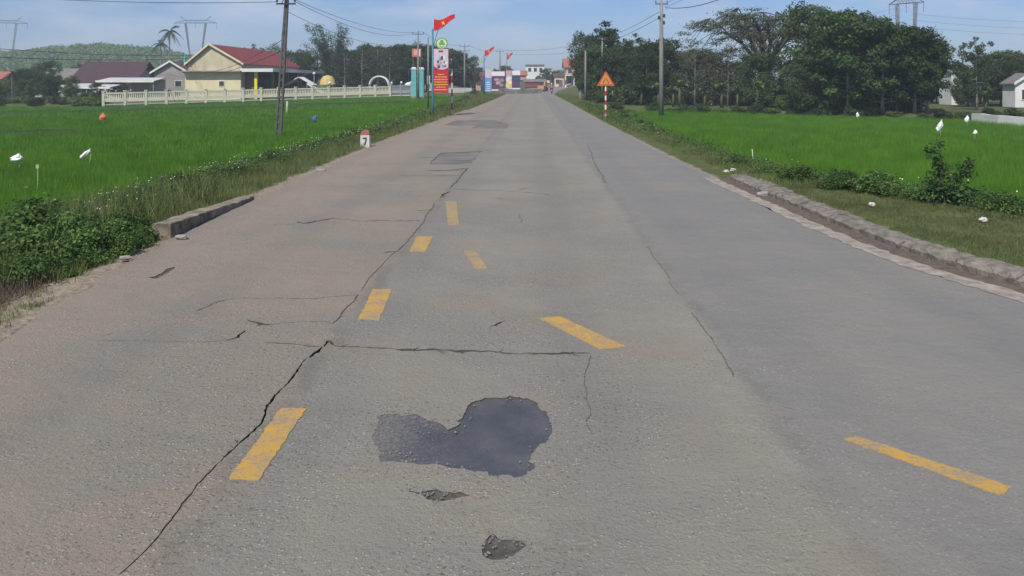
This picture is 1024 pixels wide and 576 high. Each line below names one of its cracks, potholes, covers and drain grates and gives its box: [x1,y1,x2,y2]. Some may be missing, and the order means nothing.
crack [108,320,593,434]
crack [197,295,352,311]
crack [284,210,431,225]
pothole [480,531,535,571]
pothole [400,483,472,504]
